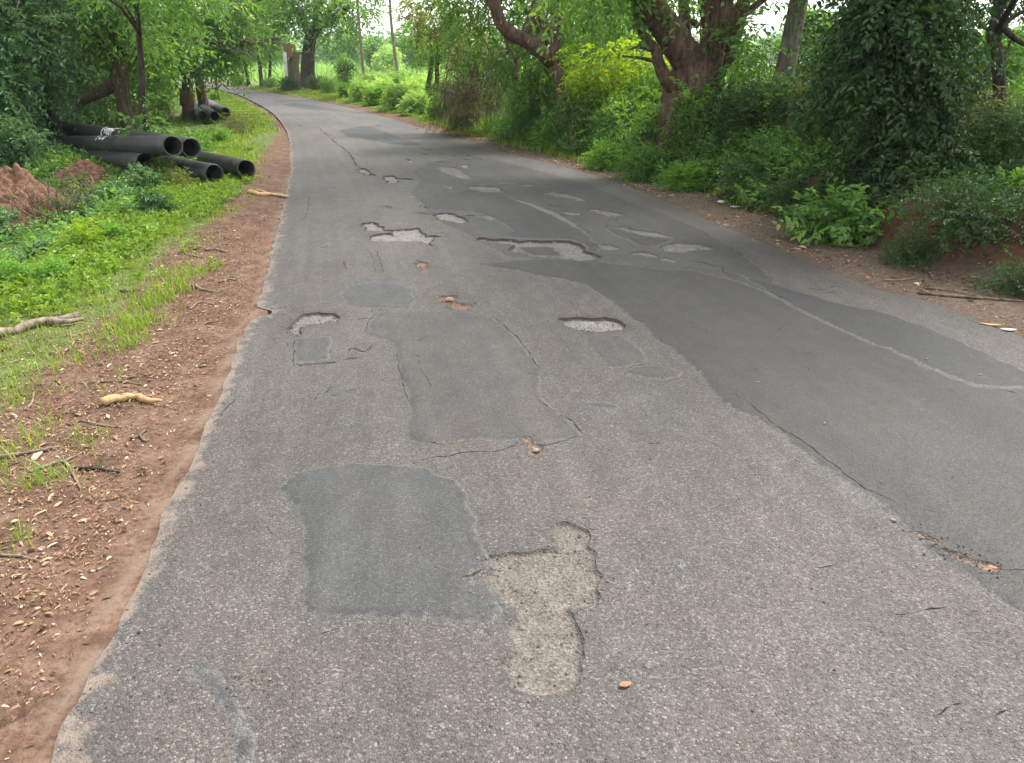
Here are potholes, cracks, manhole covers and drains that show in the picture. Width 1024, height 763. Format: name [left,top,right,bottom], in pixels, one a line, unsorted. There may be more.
pothole [479,521,603,696]
pothole [359,222,441,247]
crack [543,402,584,445]
pothole [557,317,626,332]
crack [496,319,542,375]
pothole [475,237,601,261]
pothole [382,175,413,183]
pothole [432,213,468,223]
pothole [285,312,340,337]
